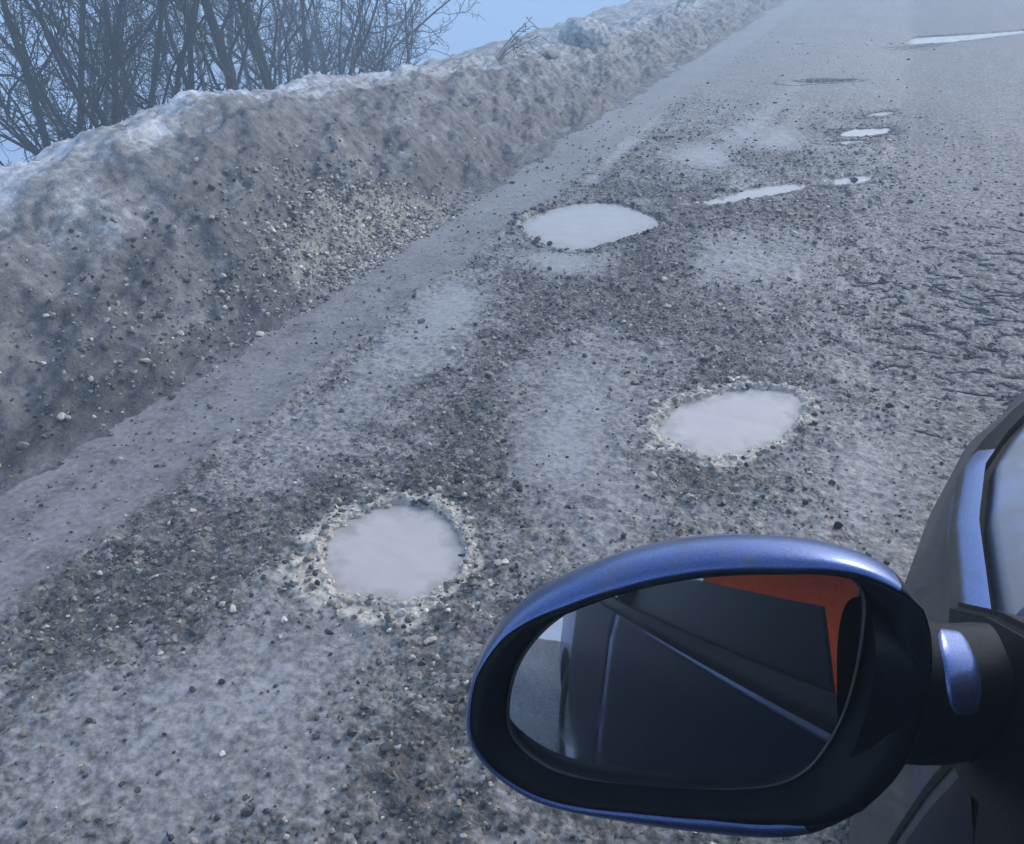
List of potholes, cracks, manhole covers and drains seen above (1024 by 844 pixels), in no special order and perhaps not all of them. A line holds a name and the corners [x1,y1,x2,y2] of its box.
pothole [275,475,522,666]
pothole [667,177,851,210]
pothole [822,125,907,138]
pothole [627,374,831,474]
pothole [800,168,892,189]
pothole [853,107,909,120]
pothole [508,195,673,254]
crack [817,225,1024,439]
